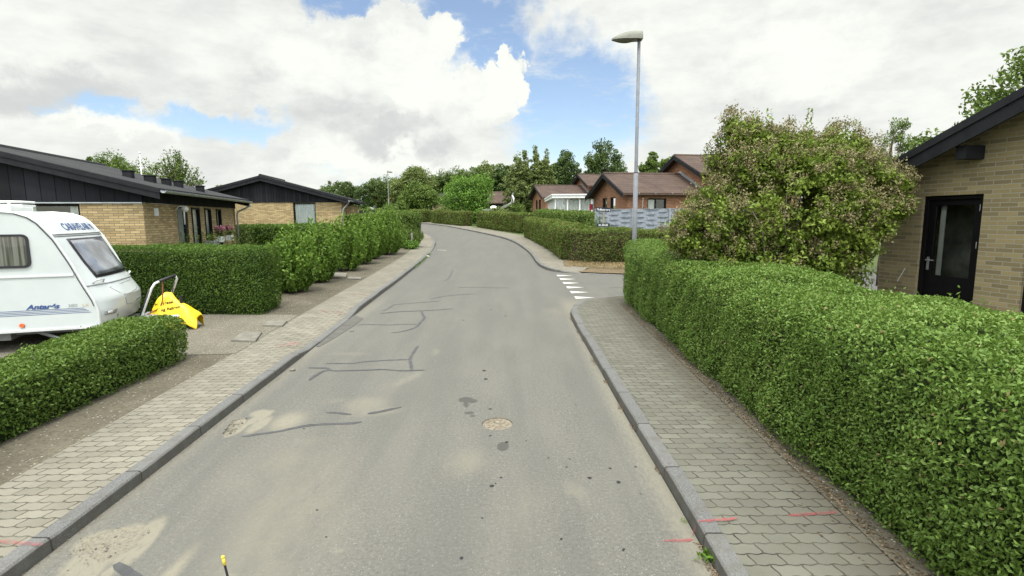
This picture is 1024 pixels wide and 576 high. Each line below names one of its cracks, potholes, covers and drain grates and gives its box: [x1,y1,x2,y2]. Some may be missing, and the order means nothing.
pothole [221,417,247,437]
manhole cover [482,417,513,430]
